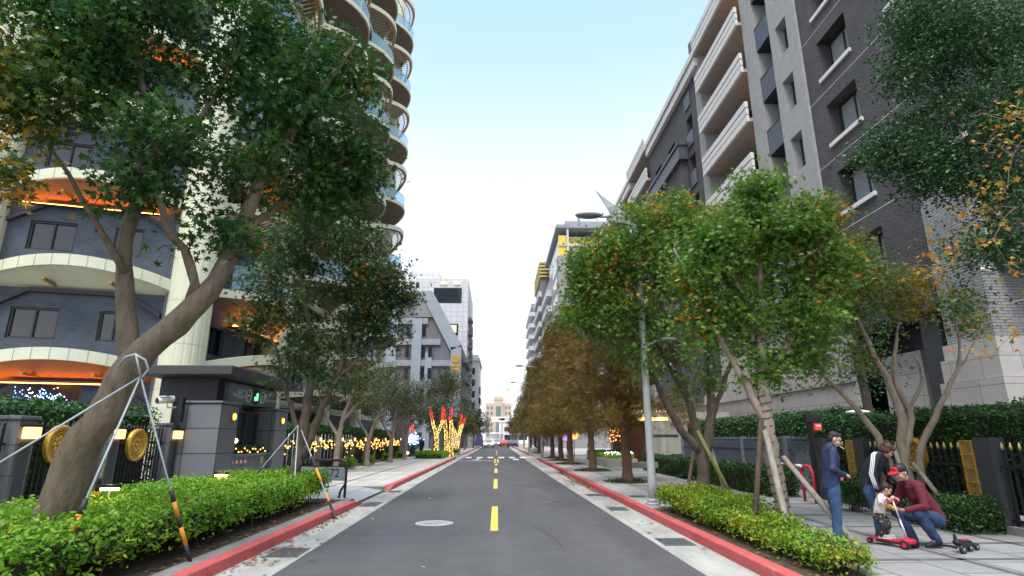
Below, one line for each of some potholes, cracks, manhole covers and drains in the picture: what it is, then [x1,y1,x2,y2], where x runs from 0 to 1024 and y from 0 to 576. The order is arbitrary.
drain grate [654,538,697,546]
drain grate [264,548,311,558]
